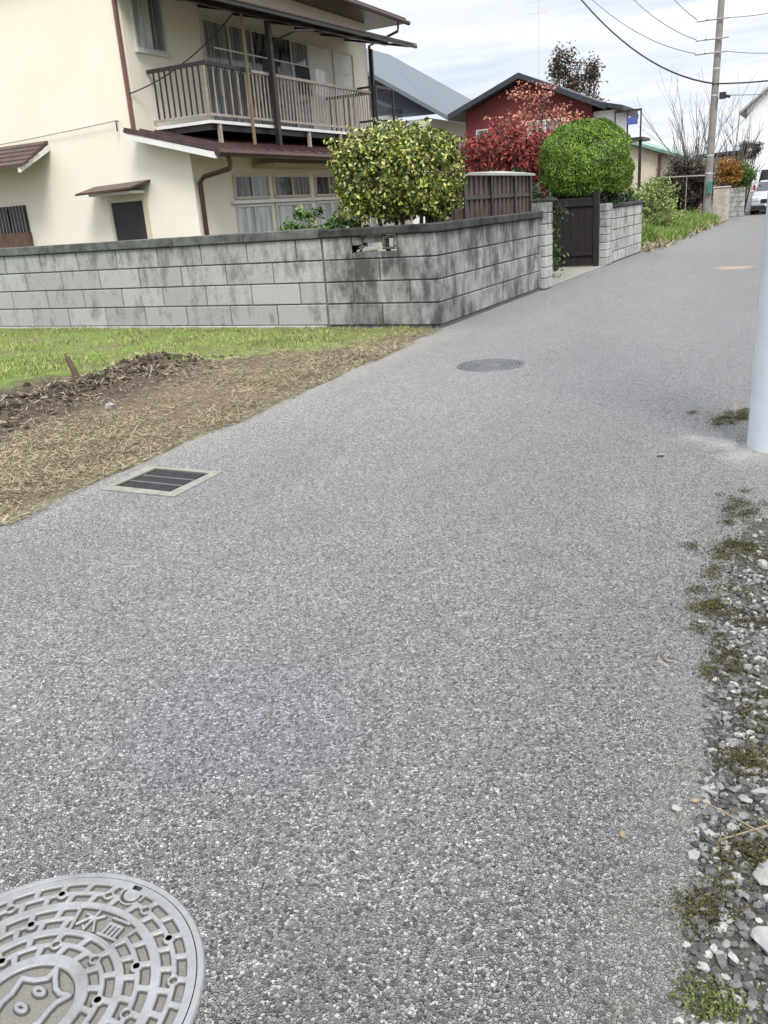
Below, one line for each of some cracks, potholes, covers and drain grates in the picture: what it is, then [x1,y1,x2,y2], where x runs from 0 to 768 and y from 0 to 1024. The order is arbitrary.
drain grate [100,466,223,497]
manhole cover [0,873,206,1024]
manhole cover [457,359,524,372]
